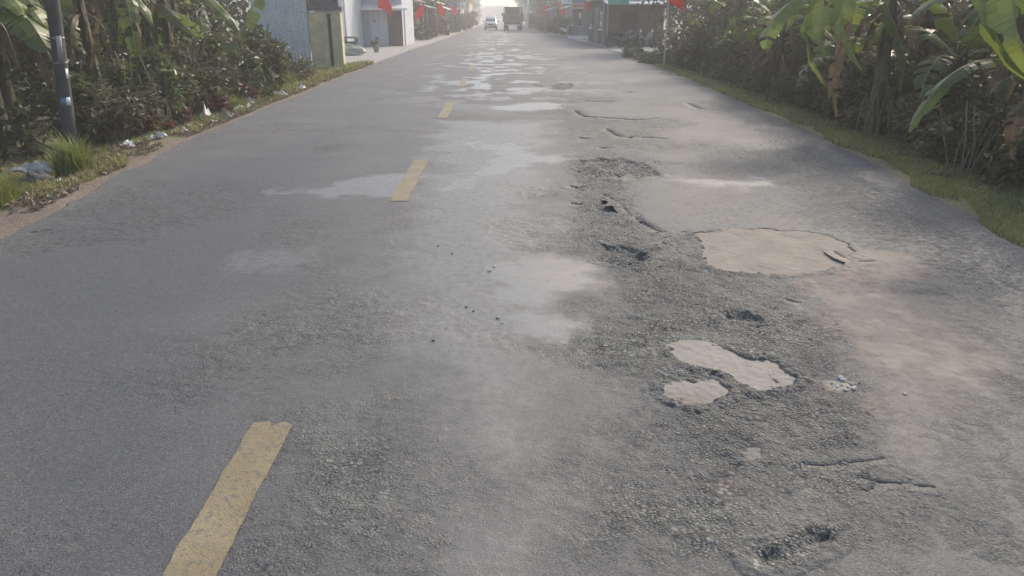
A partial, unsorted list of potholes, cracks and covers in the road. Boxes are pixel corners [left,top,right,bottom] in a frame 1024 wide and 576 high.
pothole [581,195,640,217]
crack [800,454,939,496]
pothole [648,374,754,415]
pothole [727,517,861,576]
pothole [703,305,785,335]
crack [566,91,709,150]
pothole [542,82,582,92]
pothole [657,337,814,400]
pothole [586,240,664,273]
pothole [560,155,671,184]
pothole [680,226,869,279]
